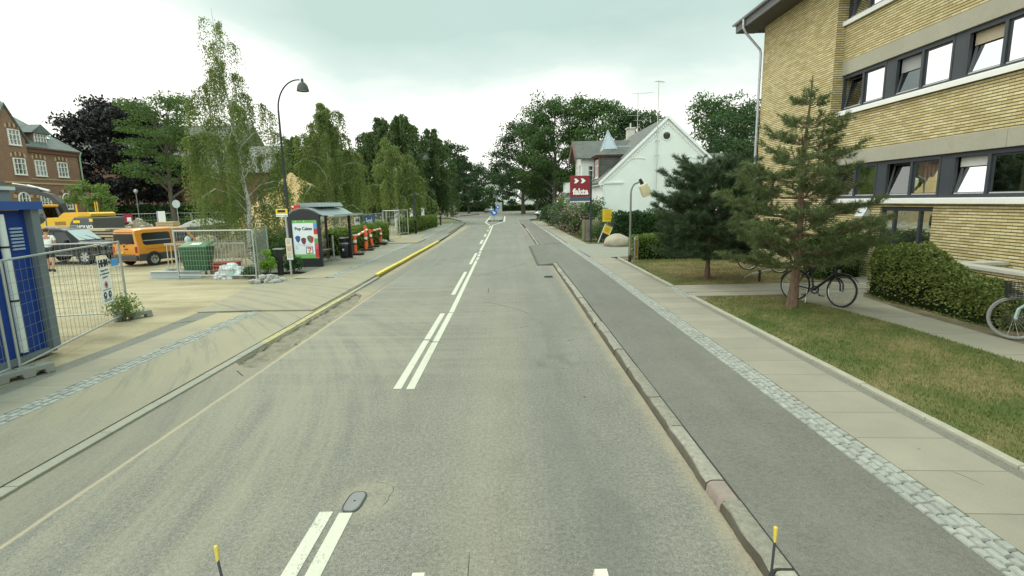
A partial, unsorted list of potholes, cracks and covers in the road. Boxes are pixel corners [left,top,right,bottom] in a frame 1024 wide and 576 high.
manhole cover [342,491,367,513]
pothole [236,294,362,368]
